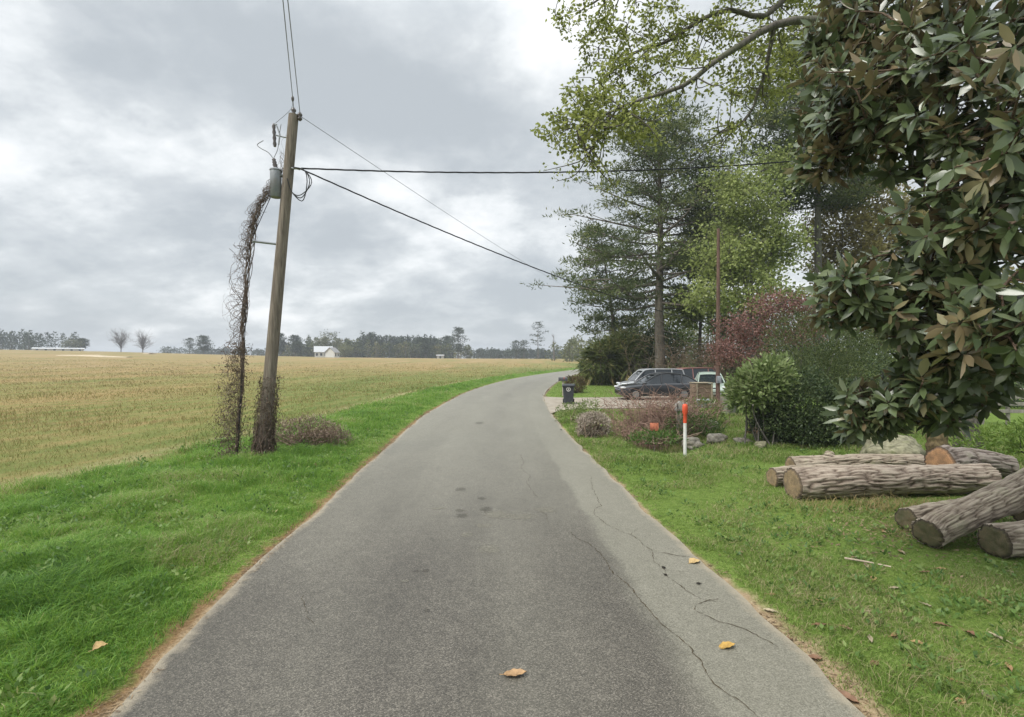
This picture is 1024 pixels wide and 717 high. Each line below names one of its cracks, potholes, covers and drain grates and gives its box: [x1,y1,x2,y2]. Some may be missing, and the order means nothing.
crack [572,491,773,717]
